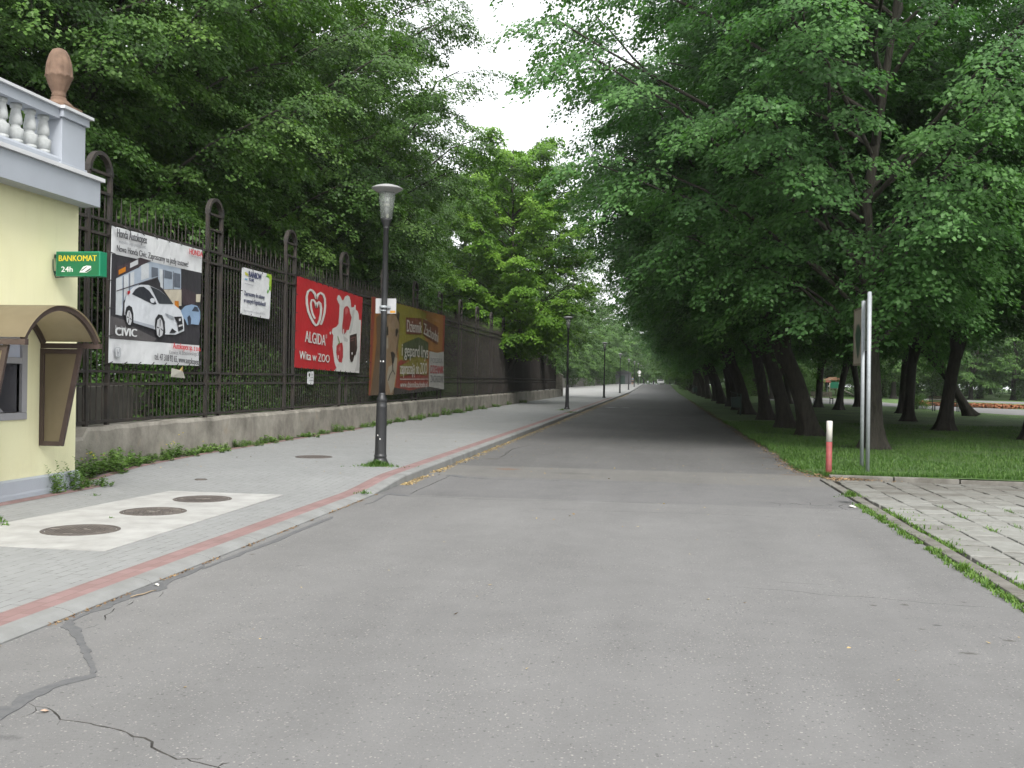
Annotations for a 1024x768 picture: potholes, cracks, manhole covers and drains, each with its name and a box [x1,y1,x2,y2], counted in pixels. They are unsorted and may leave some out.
crack [23,703,227,768]
manhole cover [119,507,187,516]
manhole cover [39,524,121,536]
manhole cover [173,495,232,503]
